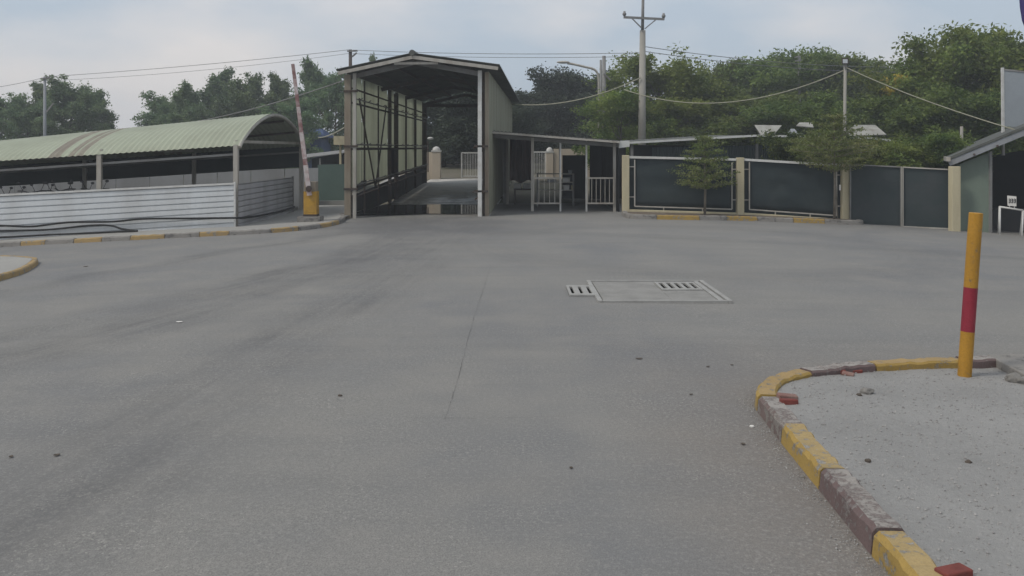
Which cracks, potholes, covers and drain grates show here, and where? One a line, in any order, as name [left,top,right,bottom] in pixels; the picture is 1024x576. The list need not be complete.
drain grate [566,285,596,297]
manhole cover [586,280,733,304]
